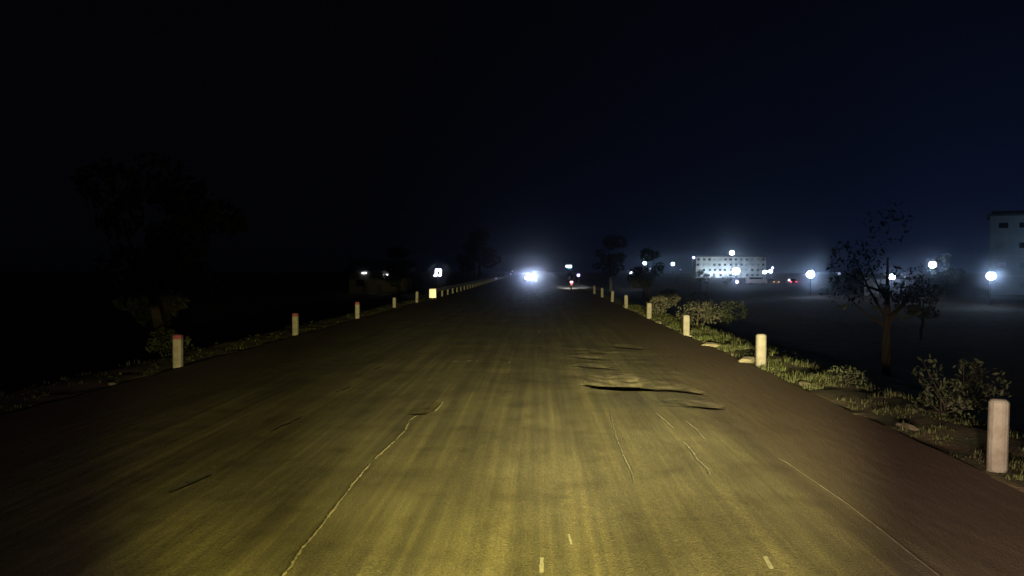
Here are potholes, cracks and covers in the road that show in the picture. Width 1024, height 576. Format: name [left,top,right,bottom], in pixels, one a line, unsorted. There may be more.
pothole [407,401,440,415]
crack [609,412,635,484]
crack [656,413,711,475]
crack [279,416,416,576]
pothole [581,372,707,395]
pothole [654,397,725,410]
